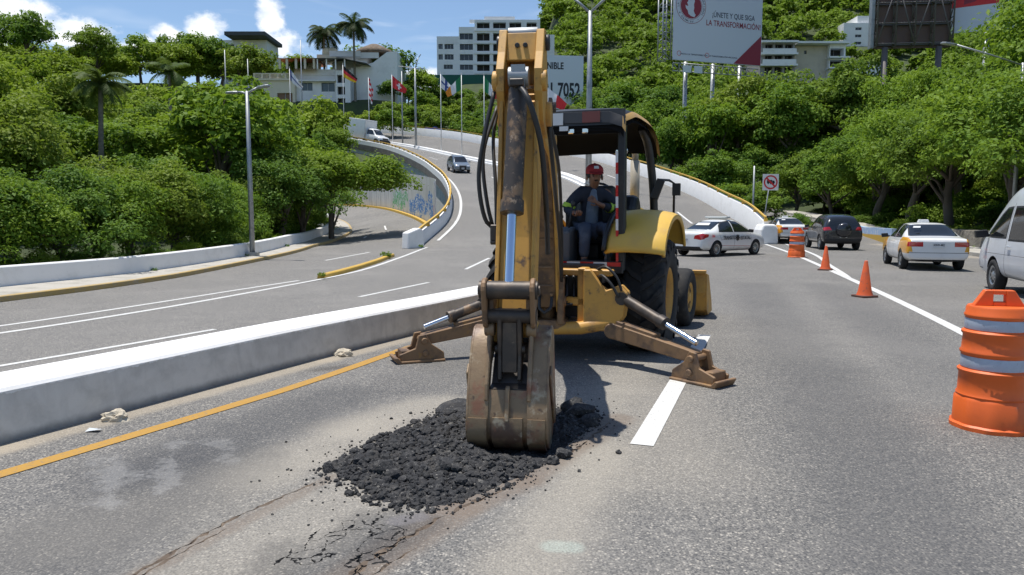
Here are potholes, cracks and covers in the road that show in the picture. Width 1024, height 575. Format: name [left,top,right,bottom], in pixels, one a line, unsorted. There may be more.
crack [274,517,407,575]
